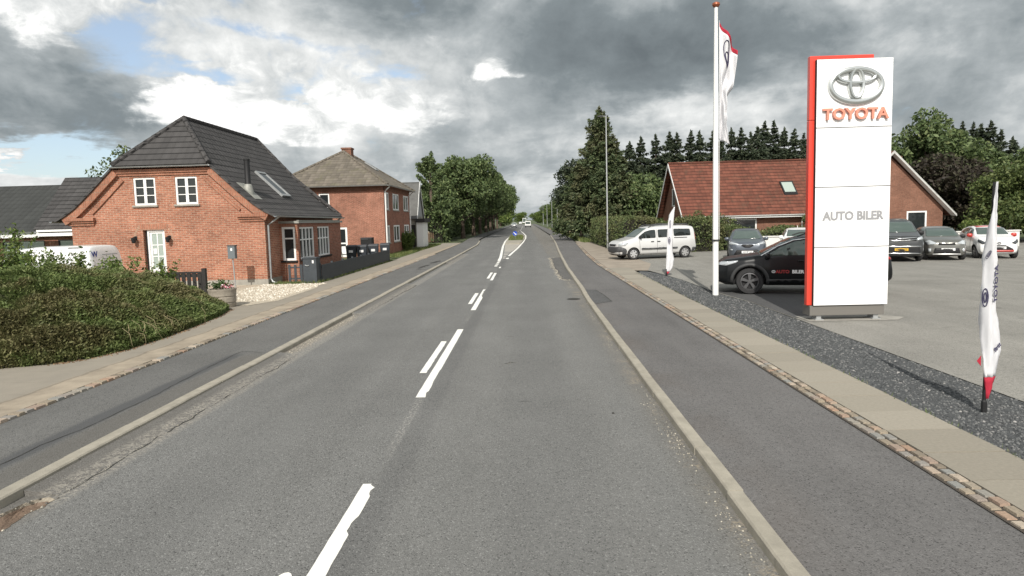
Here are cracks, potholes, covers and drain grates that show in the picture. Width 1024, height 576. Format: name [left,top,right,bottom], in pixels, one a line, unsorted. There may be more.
pothole [0,497,55,532]
